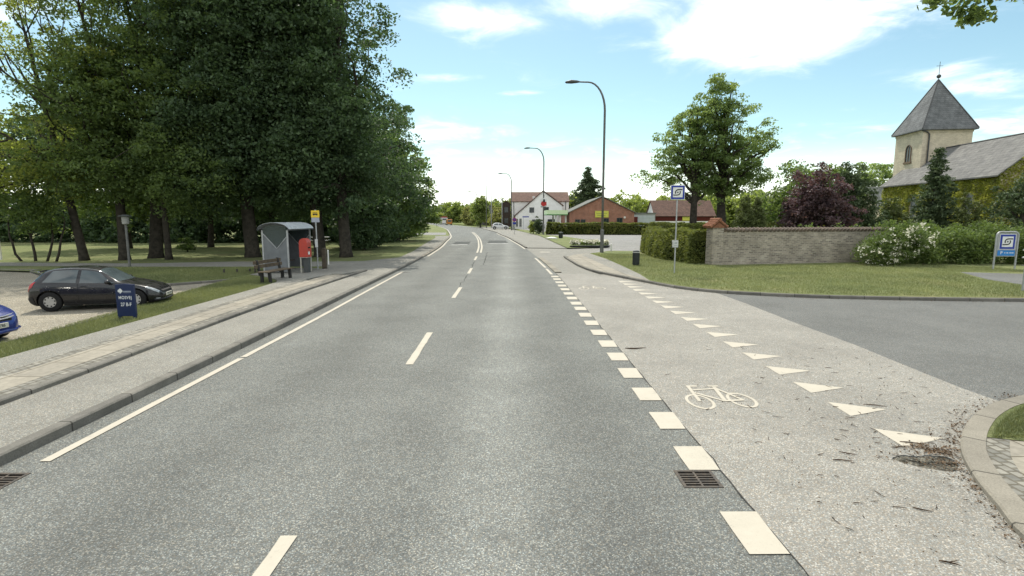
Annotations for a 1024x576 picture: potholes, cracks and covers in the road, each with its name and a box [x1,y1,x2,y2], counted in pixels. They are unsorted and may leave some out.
pothole [892,455,960,472]
drain grate [673,470,724,488]
